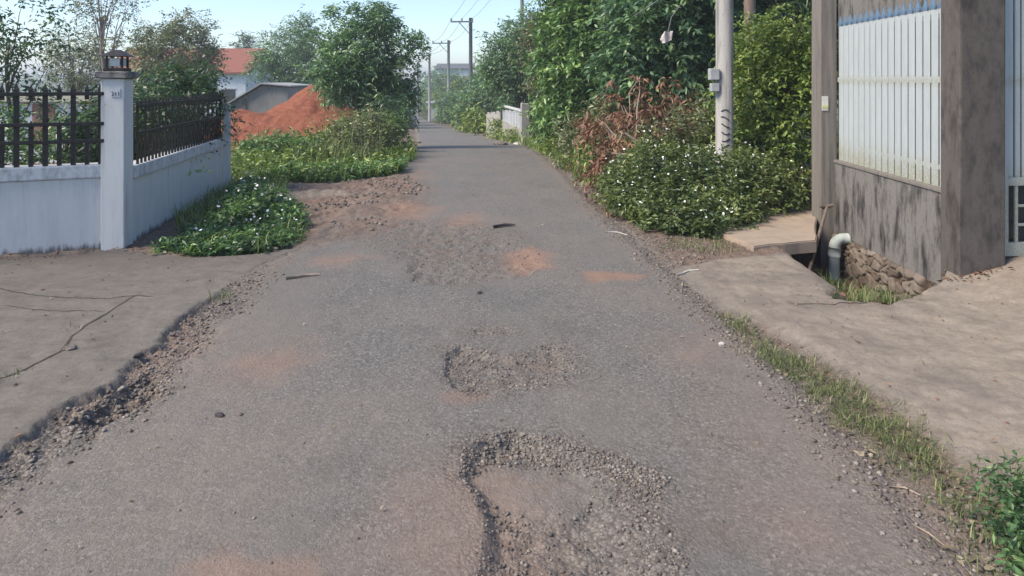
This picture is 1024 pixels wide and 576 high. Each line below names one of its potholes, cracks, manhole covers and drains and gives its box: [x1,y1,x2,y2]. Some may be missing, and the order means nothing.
pothole [67,367,174,439]
pothole [458,429,694,576]
crack [0,288,145,379]
pothole [443,342,584,397]
